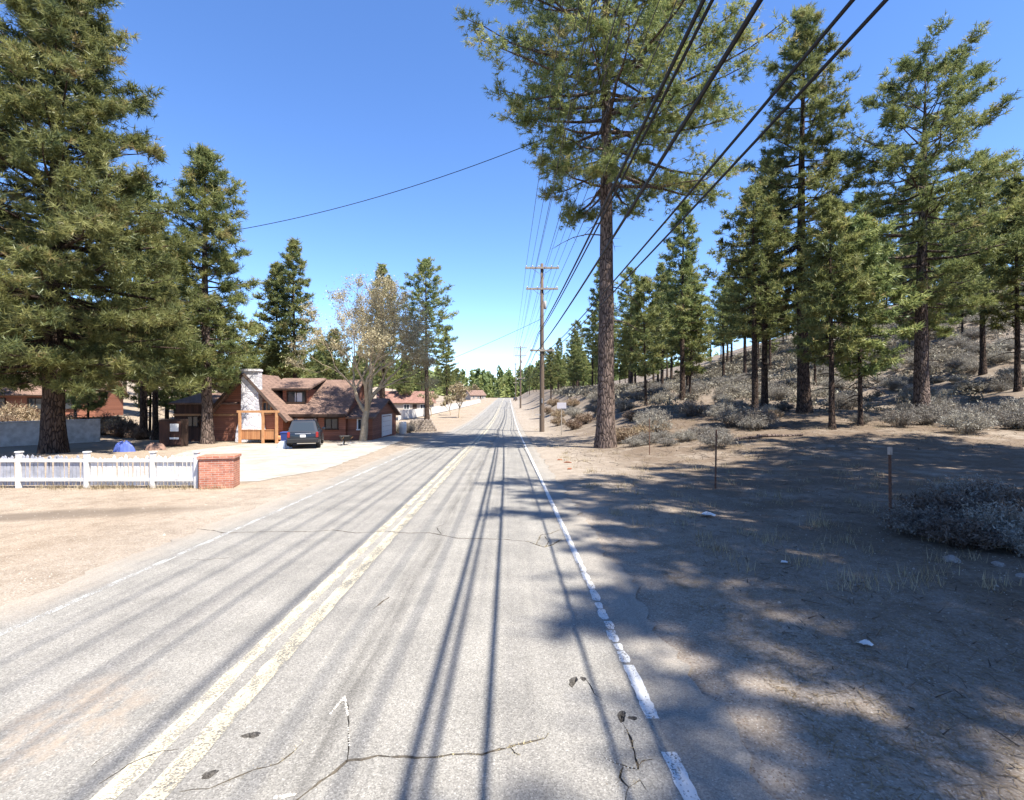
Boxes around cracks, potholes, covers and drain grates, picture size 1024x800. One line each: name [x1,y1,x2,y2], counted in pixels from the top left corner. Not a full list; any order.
crack [202,524,560,547]
crack [92,696,549,800]
crack [604,724,652,800]
